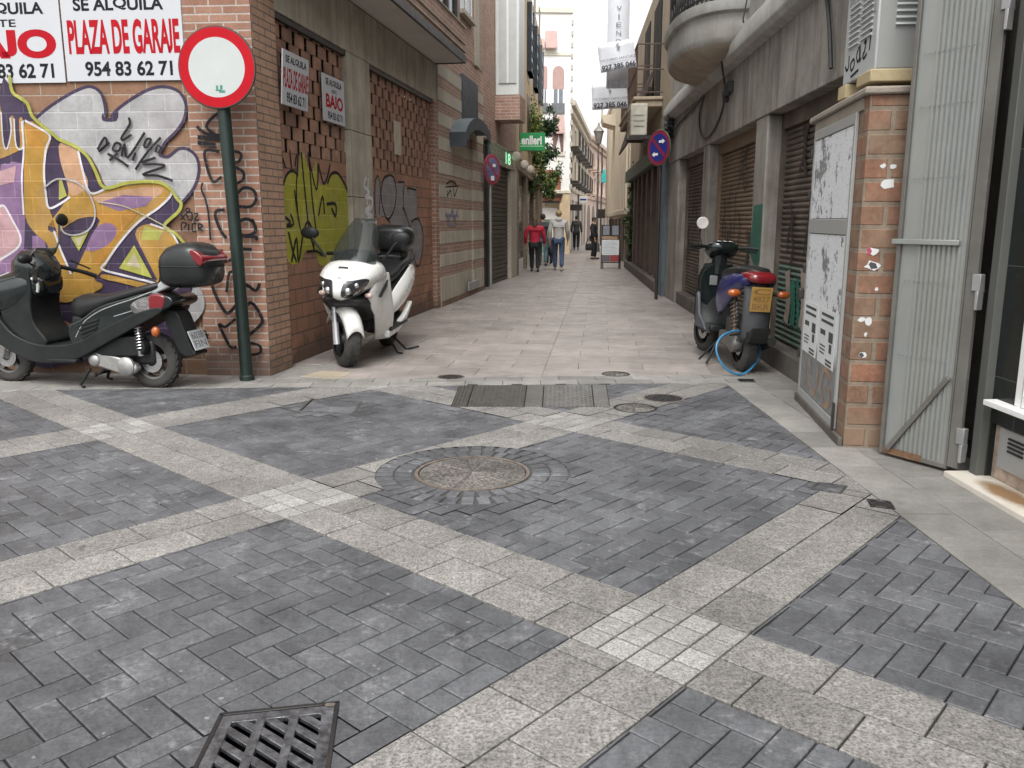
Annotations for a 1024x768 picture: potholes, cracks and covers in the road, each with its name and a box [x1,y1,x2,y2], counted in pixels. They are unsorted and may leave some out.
utility cover [866,499,896,512]
drain grate [193,701,340,768]
utility cover [643,394,685,404]
drain grate [452,384,610,408]
manhole cover [374,446,570,506]
utility cover [613,403,657,415]
